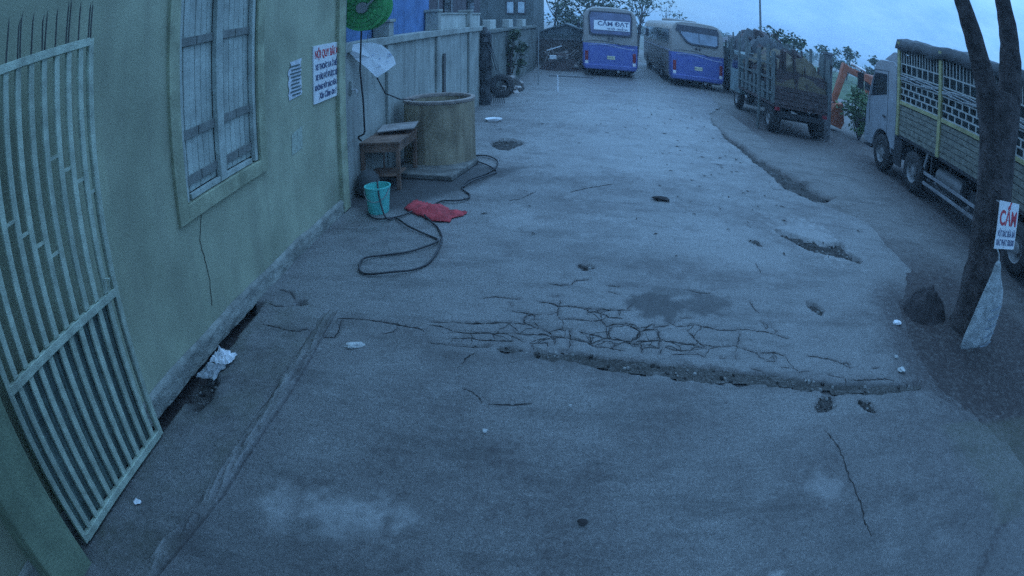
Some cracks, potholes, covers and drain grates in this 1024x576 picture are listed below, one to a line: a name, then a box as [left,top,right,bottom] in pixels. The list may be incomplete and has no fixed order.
pothole [858,399,876,413]
pothole [780,235,861,264]
pothole [491,140,522,151]
crack [465,389,532,406]
crack [324,296,908,387]
pothole [481,346,921,395]
pothole [815,397,835,413]
crack [828,433,872,536]
